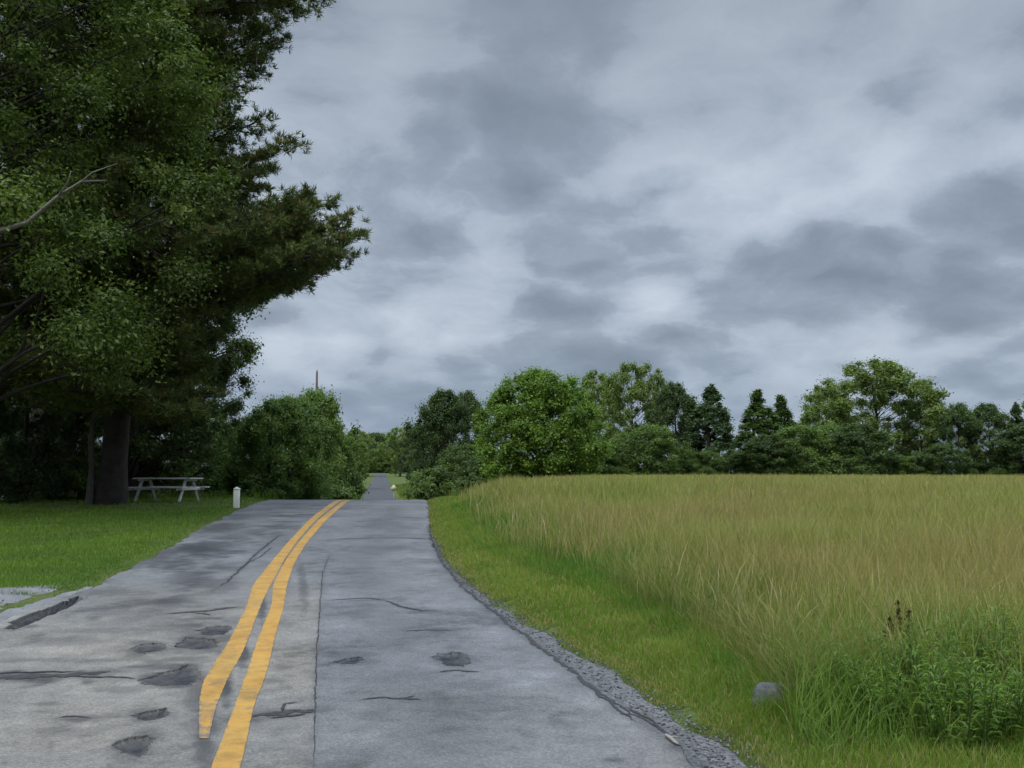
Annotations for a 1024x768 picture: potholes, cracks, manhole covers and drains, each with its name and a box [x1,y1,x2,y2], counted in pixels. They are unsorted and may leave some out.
pothole [189,625,237,636]
pothole [123,706,178,723]
pothole [426,651,477,669]
pothole [131,663,208,688]
pothole [0,595,92,631]
pothole [123,642,176,655]
crack [213,536,278,590]
crack [252,701,314,718]
pothole [326,656,370,666]
crack [335,598,427,611]
pothole [103,733,163,760]
